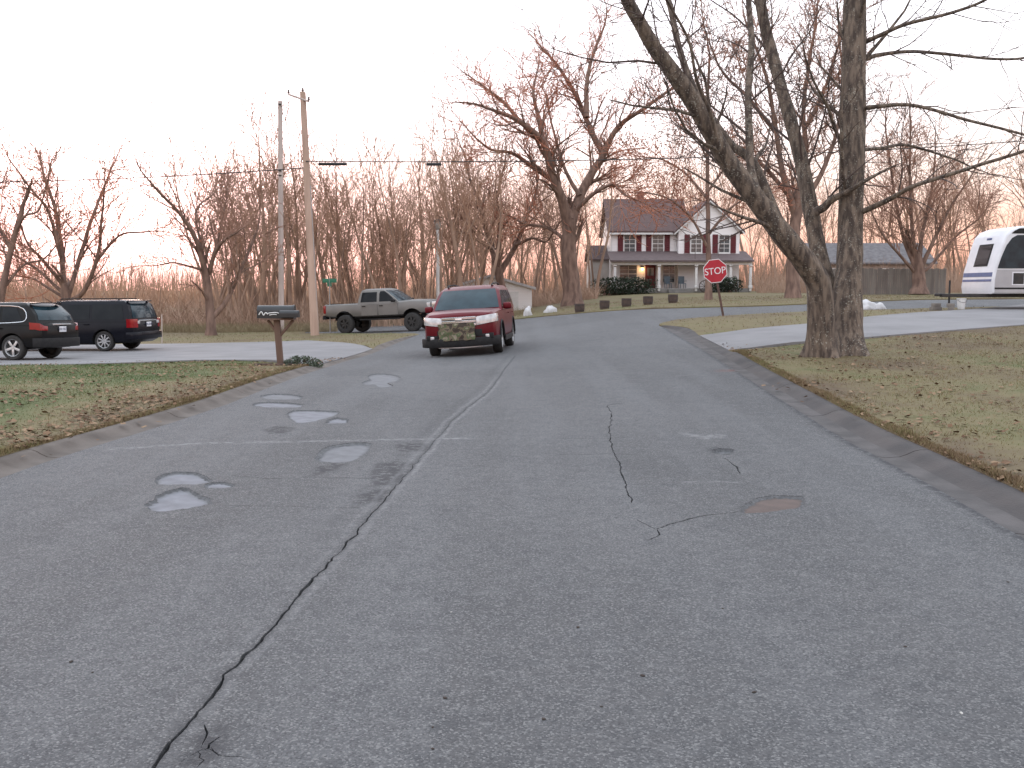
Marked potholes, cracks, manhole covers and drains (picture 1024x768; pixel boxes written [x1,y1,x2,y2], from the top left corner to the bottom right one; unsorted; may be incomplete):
pothole [362,374,401,387]
crack [155,426,449,768]
pothole [740,496,806,513]
pothole [144,488,211,511]
pothole [287,410,340,423]
pothole [314,443,372,463]
pothole [155,472,212,485]
